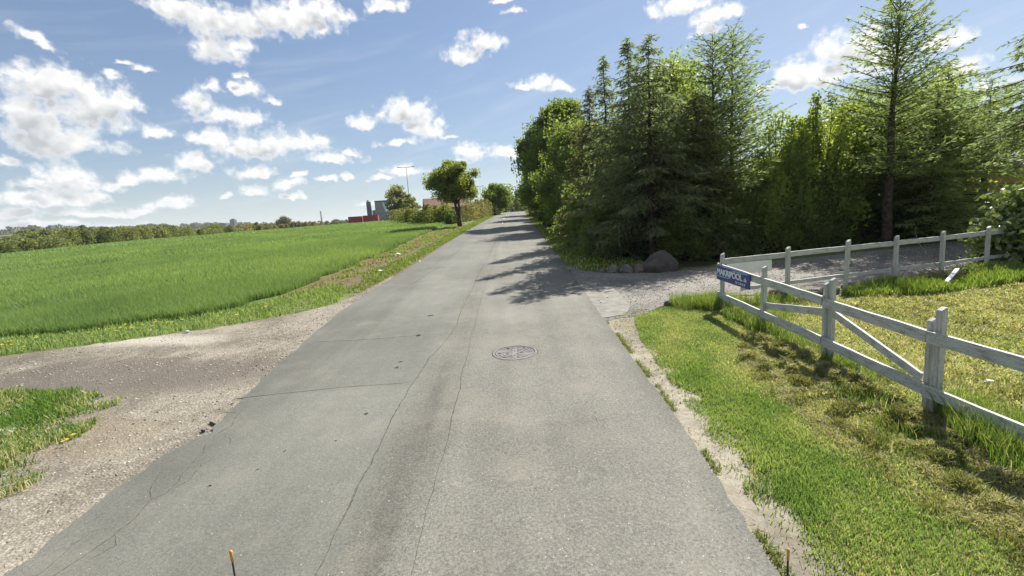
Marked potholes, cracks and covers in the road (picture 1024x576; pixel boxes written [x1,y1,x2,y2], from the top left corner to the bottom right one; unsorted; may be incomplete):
crack [36,241,496,576]
manhole cover [492,345,537,360]
